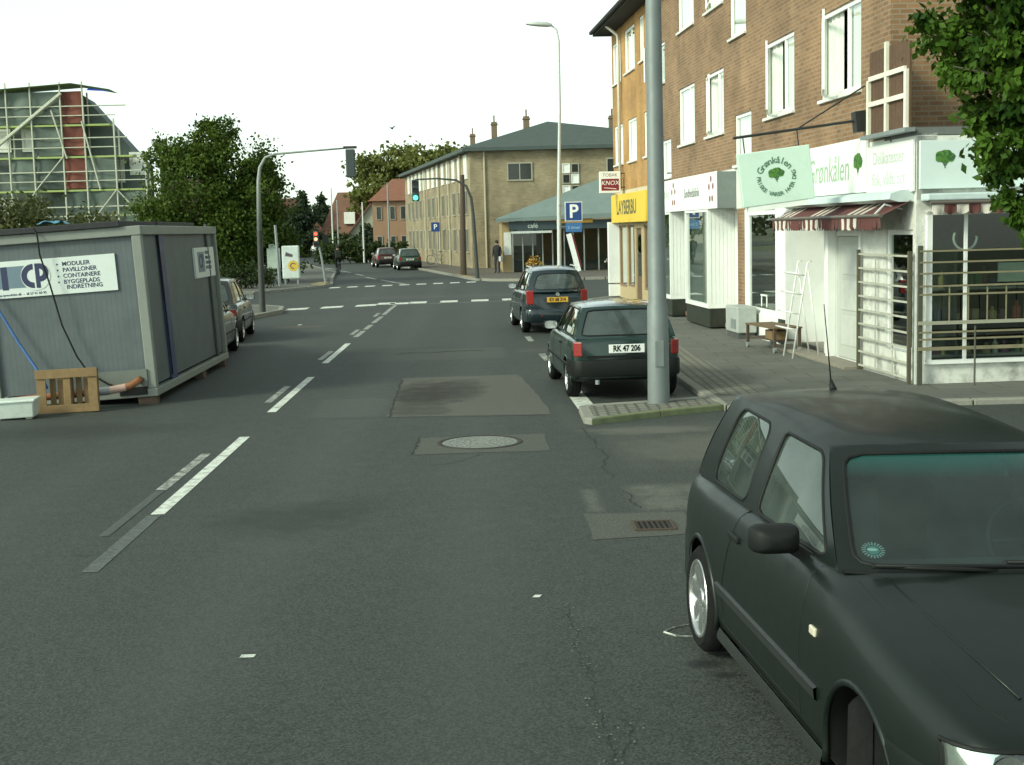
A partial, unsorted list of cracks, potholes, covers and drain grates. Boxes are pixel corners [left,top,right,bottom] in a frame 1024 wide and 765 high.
crack [565,603,645,765]
drain grate [630,519,677,531]
manhole cover [437,435,523,449]
